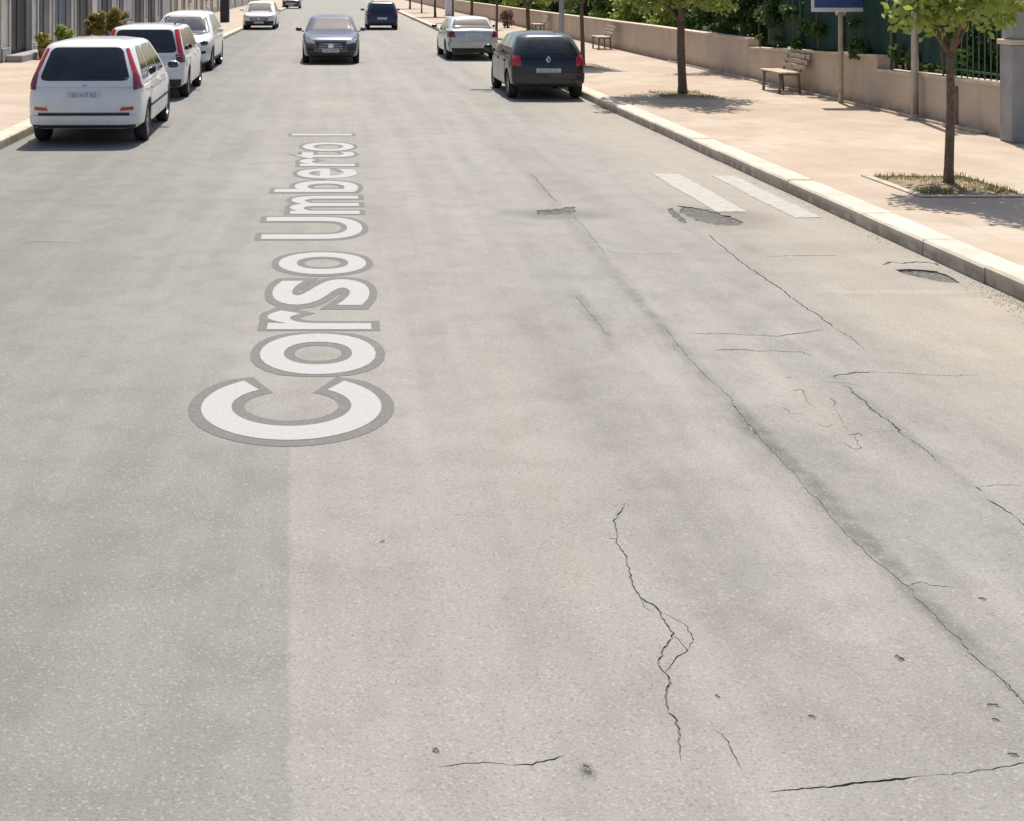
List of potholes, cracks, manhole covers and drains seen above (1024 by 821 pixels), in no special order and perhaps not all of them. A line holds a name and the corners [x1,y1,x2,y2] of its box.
pothole [897,269,960,283]
pothole [536,206,576,216]
pothole [667,208,687,223]
crack [442,755,565,767]
crack [772,762,1024,792]
crack [611,503,694,762]
pothole [678,206,744,226]
crack [693,235,866,357]
crack [786,372,979,463]
